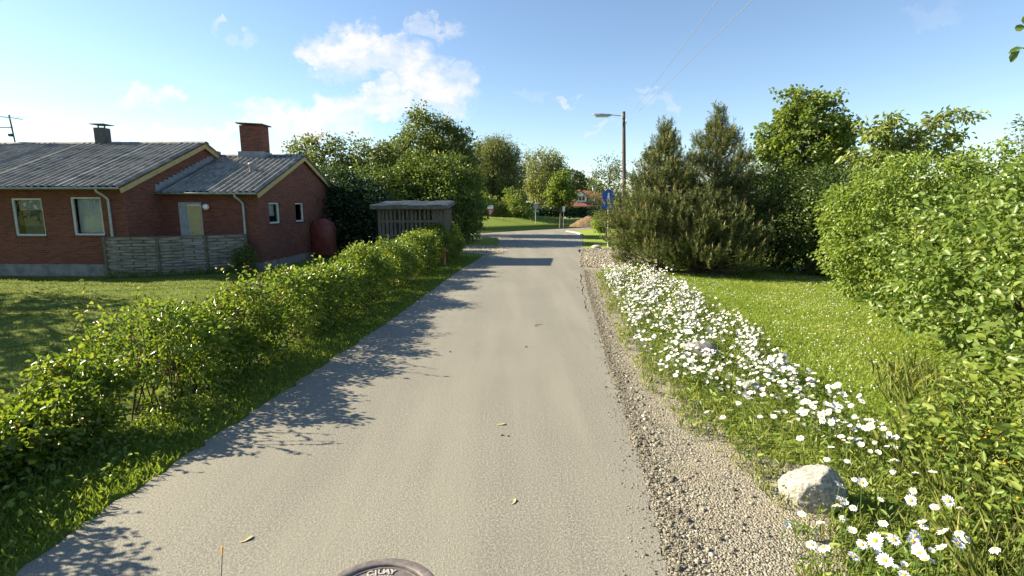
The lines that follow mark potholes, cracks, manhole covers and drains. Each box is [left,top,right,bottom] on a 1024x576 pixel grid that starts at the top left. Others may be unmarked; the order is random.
manhole cover [335,558,434,576]
